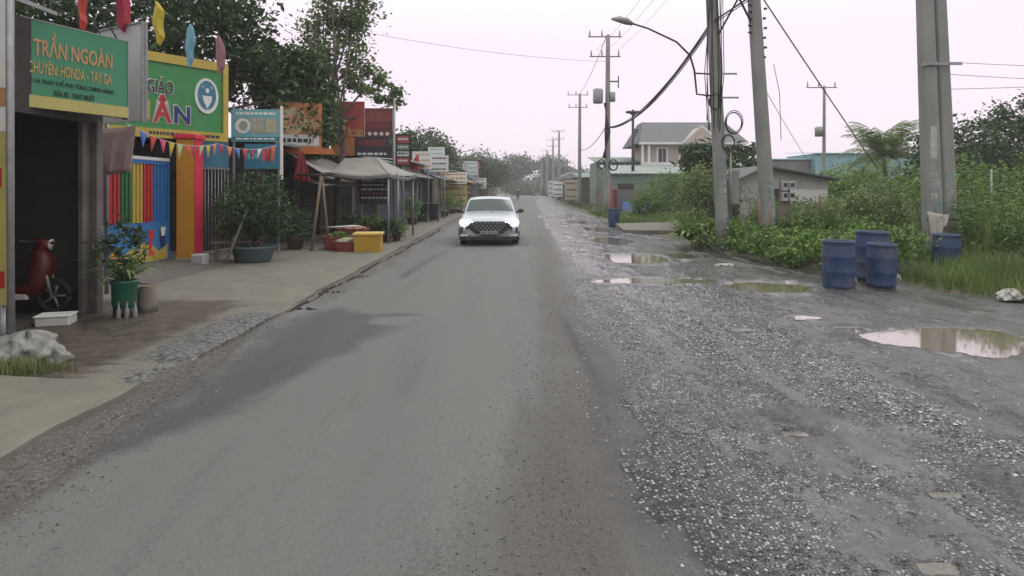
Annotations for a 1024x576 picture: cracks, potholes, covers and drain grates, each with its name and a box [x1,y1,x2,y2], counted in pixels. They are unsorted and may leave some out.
pothole [601,252,671,264]
pothole [717,278,822,293]
pothole [848,324,1024,358]
pothole [589,237,635,245]
